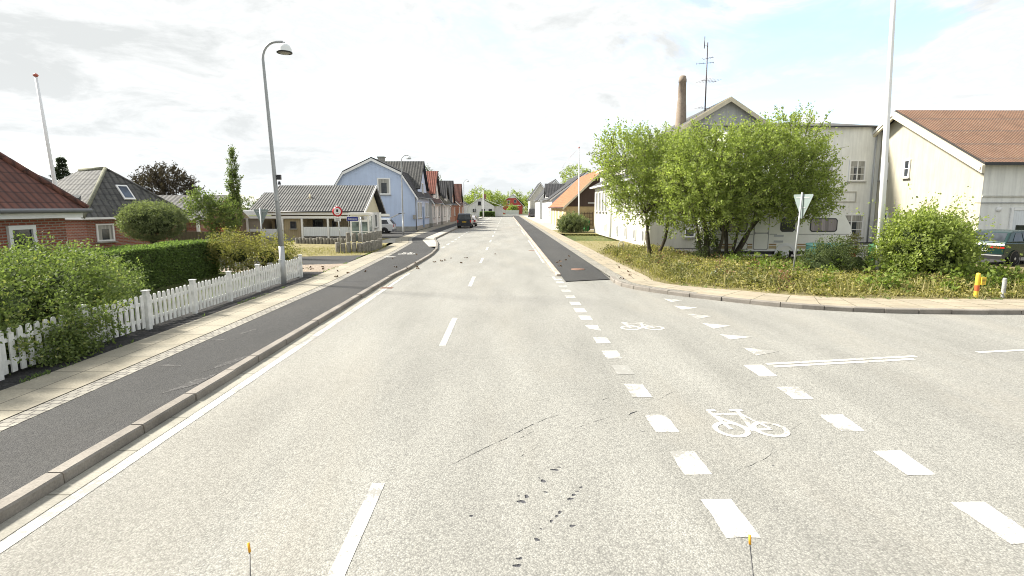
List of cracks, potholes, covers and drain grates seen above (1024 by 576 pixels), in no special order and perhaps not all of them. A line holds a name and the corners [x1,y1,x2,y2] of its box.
crack [451,416,554,465]
